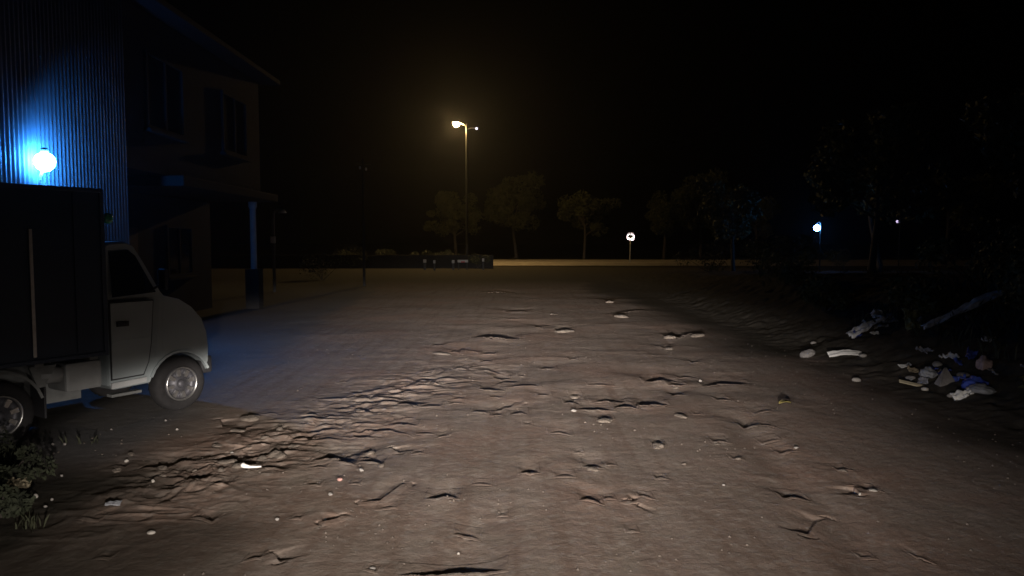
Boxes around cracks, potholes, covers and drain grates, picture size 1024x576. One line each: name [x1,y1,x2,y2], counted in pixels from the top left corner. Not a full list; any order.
crack [429,341,616,454]
crack [210,369,468,527]
pothole [653,328,707,338]
crack [141,472,191,488]
pothole [468,330,522,340]
